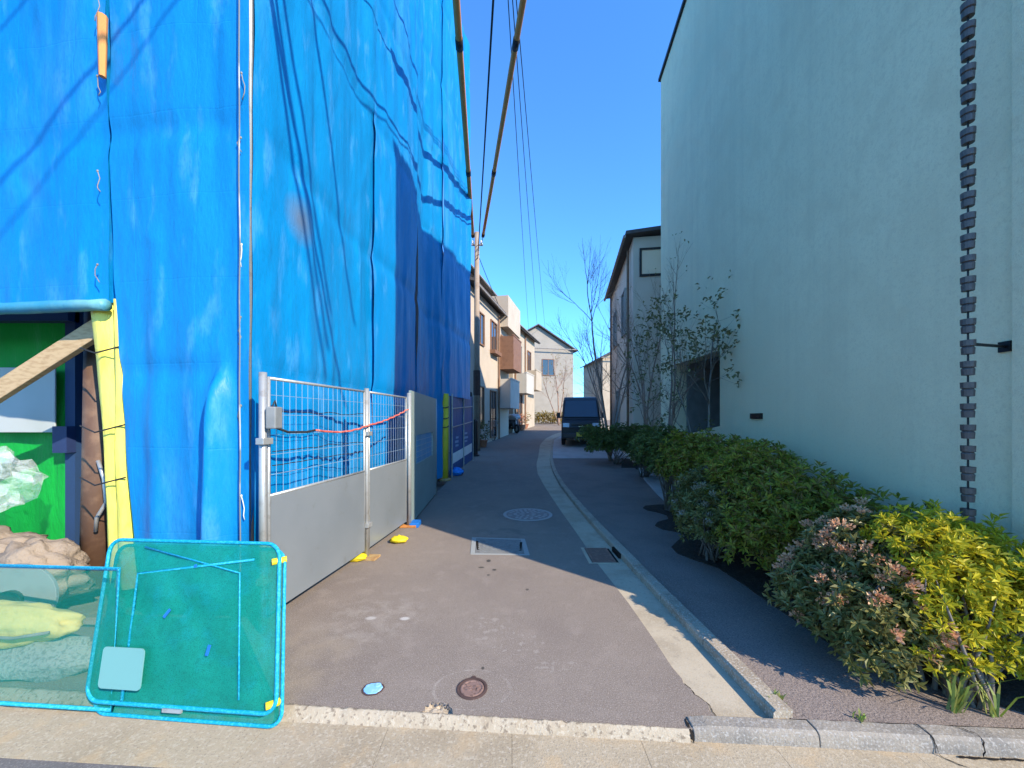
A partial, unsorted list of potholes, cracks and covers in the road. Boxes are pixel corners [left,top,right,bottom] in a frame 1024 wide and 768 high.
manhole cover [456,676,487,700]
utility cover [470,537,530,555]
manhole cover [503,508,552,521]
drain grate [581,547,621,564]
